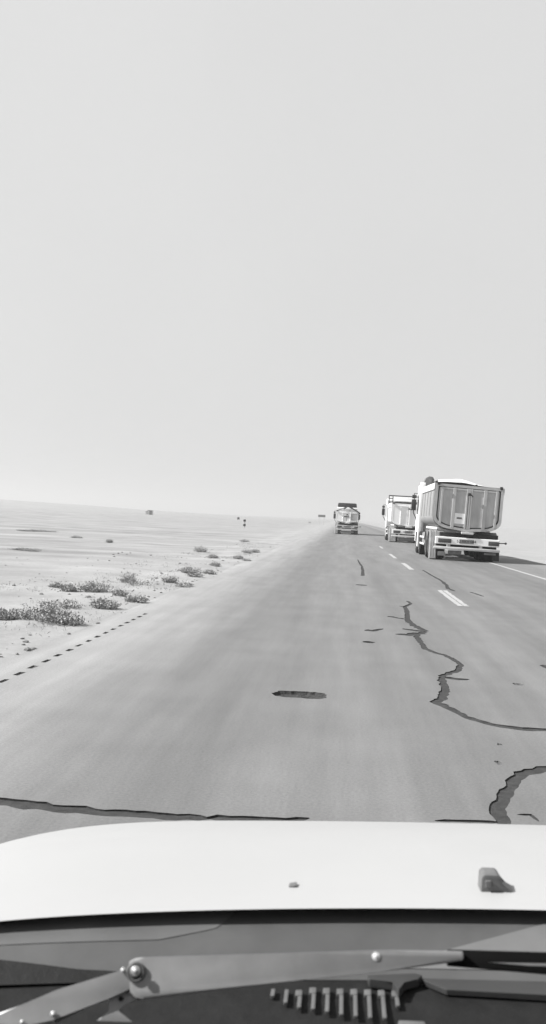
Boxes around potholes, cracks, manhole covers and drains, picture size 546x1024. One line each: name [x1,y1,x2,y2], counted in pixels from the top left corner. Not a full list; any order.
crack [435,766,546,824]
crack [363,570,546,731]
crack [0,798,310,821]
pothole [272,691,327,699]
